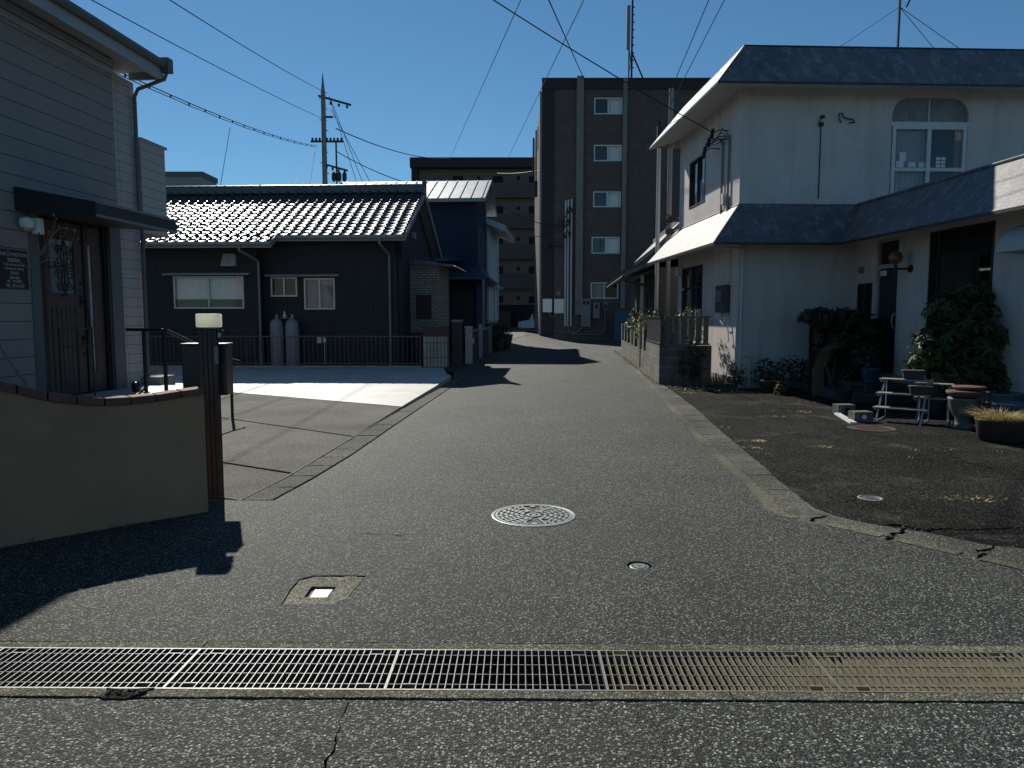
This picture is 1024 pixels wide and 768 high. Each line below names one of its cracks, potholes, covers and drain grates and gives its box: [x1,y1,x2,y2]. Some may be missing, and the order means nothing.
manhole cover [492,504,576,527]
utility cover [627,561,652,569]
drain grate [599,650,842,691]
crack [324,703,349,768]
drain grate [0,648,200,688]
pothole [99,688,154,700]
drain grate [809,651,1024,692]
drain grate [385,649,608,690]
crack [884,524,1024,558]
drain grate [163,649,399,689]
